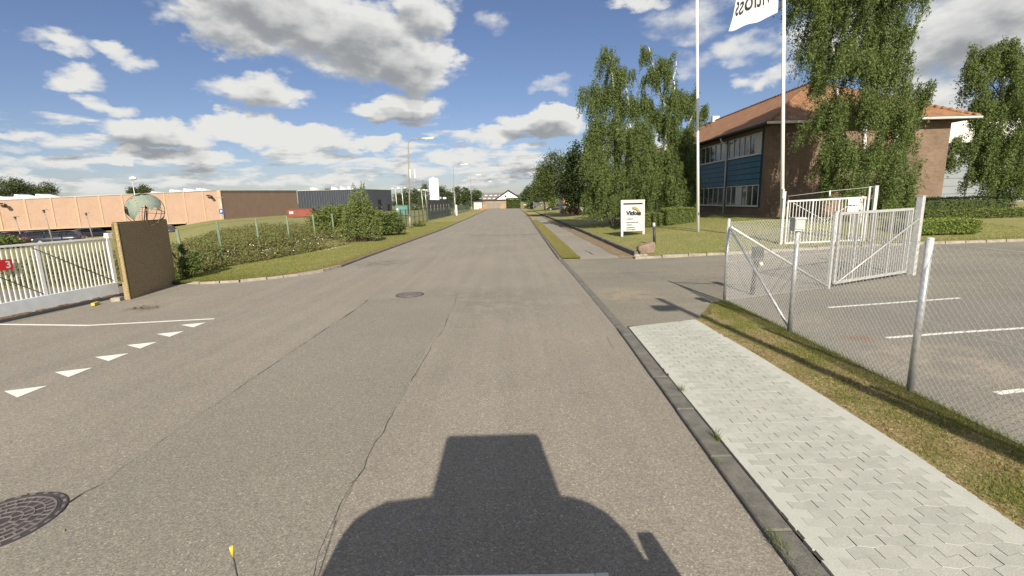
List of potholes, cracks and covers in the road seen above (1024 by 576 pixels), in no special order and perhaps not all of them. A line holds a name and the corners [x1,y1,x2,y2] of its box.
crack [313,295,457,576]
manhole cover [0,492,69,547]
